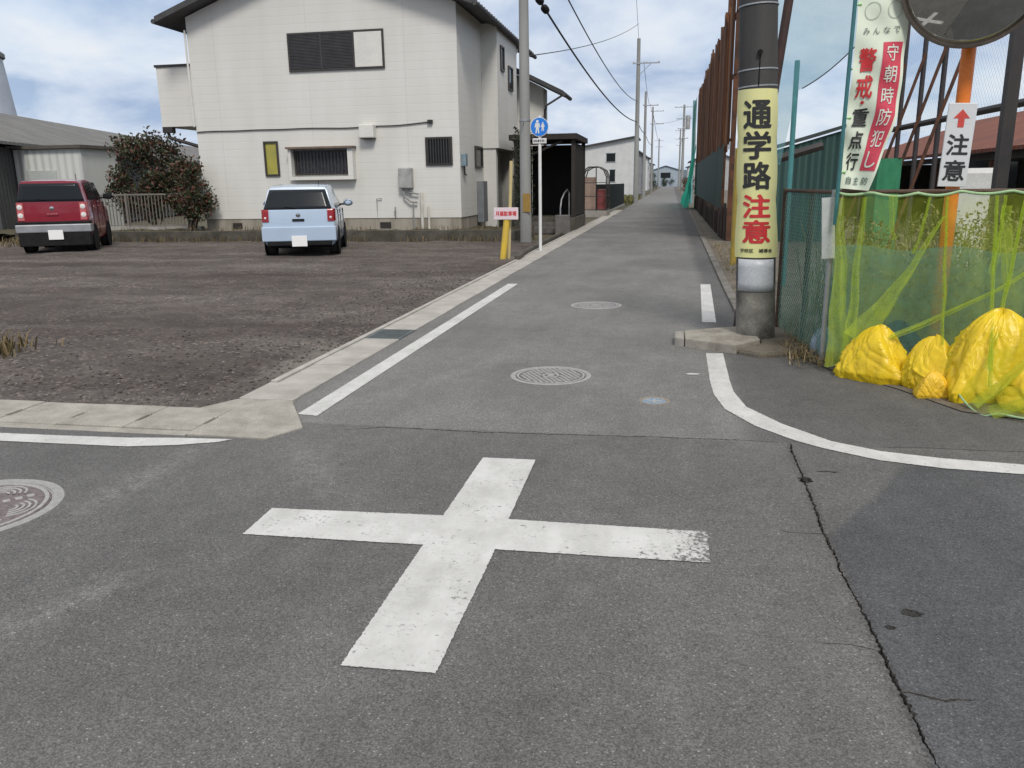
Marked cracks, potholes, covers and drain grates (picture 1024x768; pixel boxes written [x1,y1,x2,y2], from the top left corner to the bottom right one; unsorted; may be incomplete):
utility cover [639,397,669,405]
manhole cover [0,479,65,531]
manhole cover [511,366,591,385]
crack [784,444,974,768]
drain grate [366,329,415,340]
